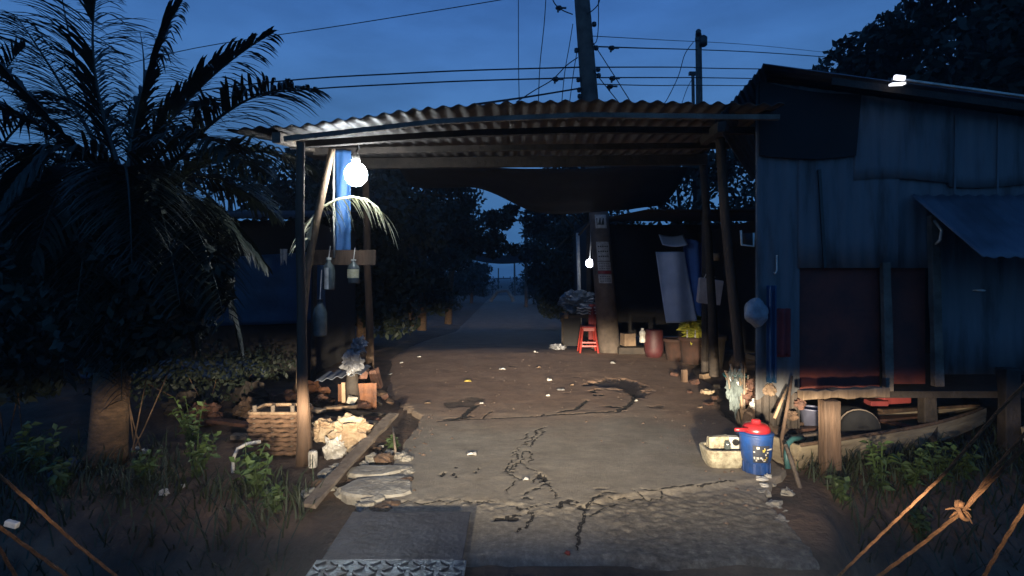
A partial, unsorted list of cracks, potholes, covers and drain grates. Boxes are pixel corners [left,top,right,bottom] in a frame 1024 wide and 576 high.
crack [401,395,734,550]
pothole [588,379,648,398]
pothole [444,397,485,408]
